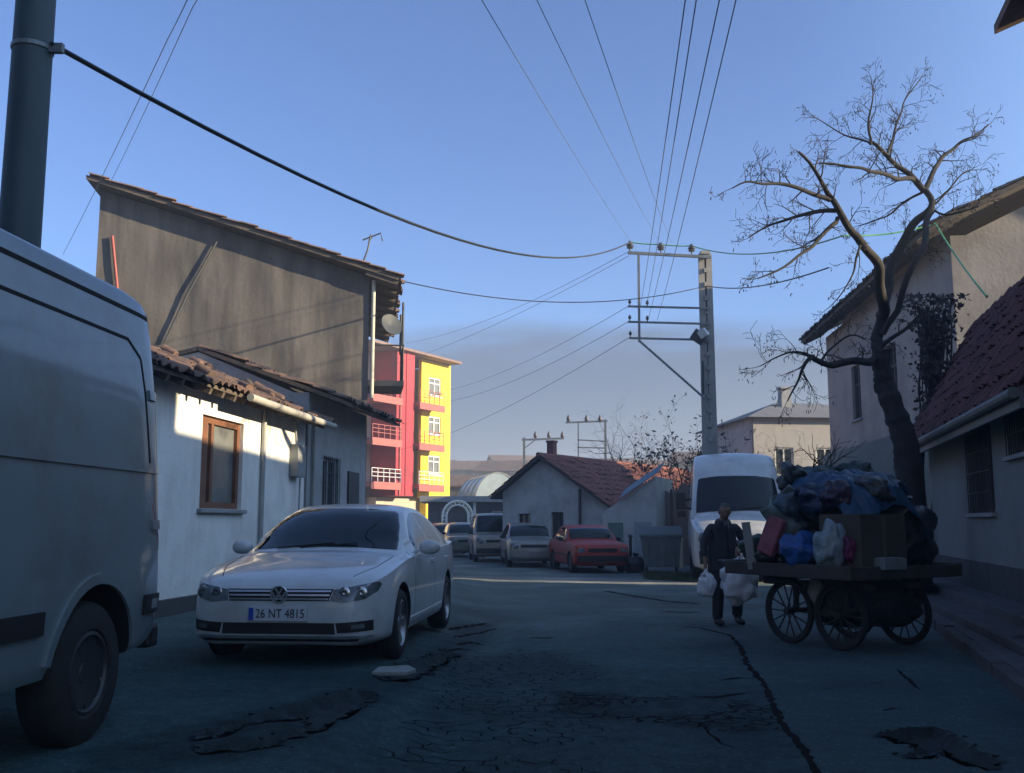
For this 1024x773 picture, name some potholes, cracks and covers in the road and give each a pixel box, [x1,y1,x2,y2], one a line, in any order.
crack [379,591,821,773]
pothole [875,726,1007,770]
pothole [189,687,379,755]
crack [897,669,920,689]
